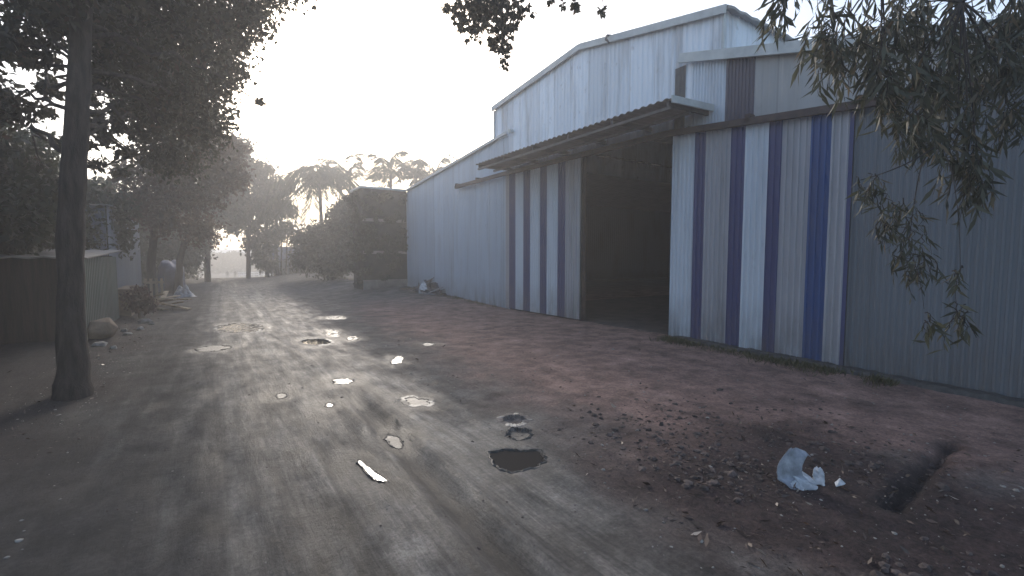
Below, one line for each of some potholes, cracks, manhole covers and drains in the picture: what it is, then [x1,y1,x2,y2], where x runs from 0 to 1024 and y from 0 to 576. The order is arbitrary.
pothole [298,338,335,346]
pothole [496,413,532,427]
pothole [486,448,547,474]
pothole [505,427,534,441]
